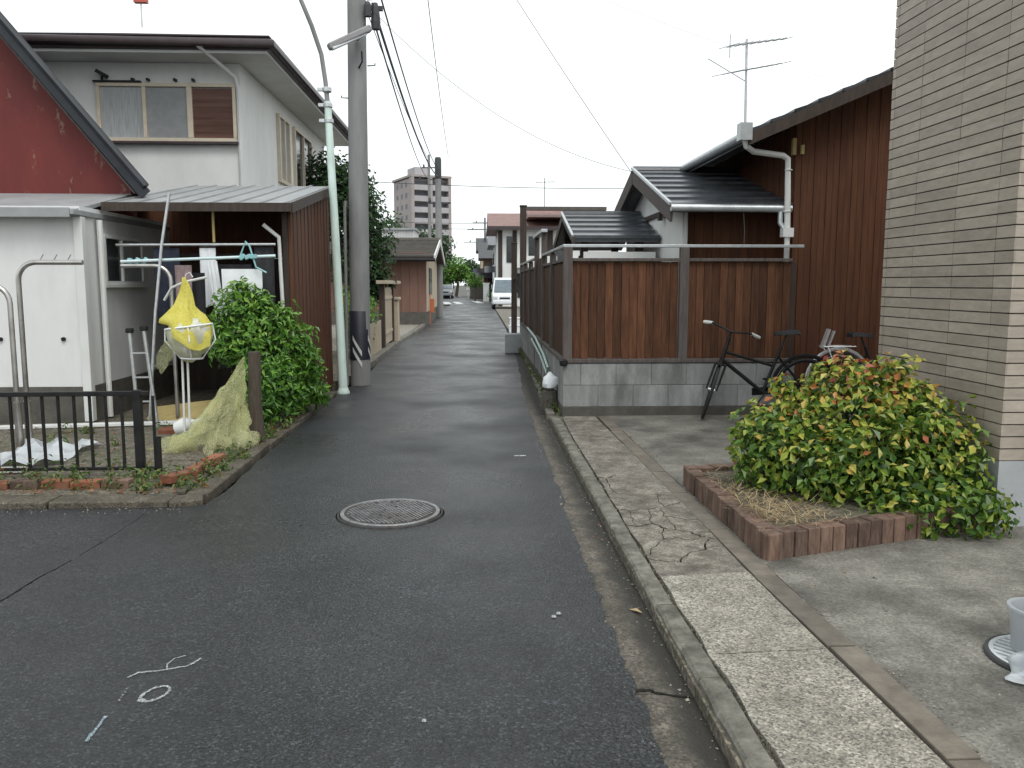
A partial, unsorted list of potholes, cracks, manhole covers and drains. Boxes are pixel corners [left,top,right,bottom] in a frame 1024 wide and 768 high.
crack [617,508,708,563]
crack [636,688,692,699]
manhole cover [337,498,443,530]
